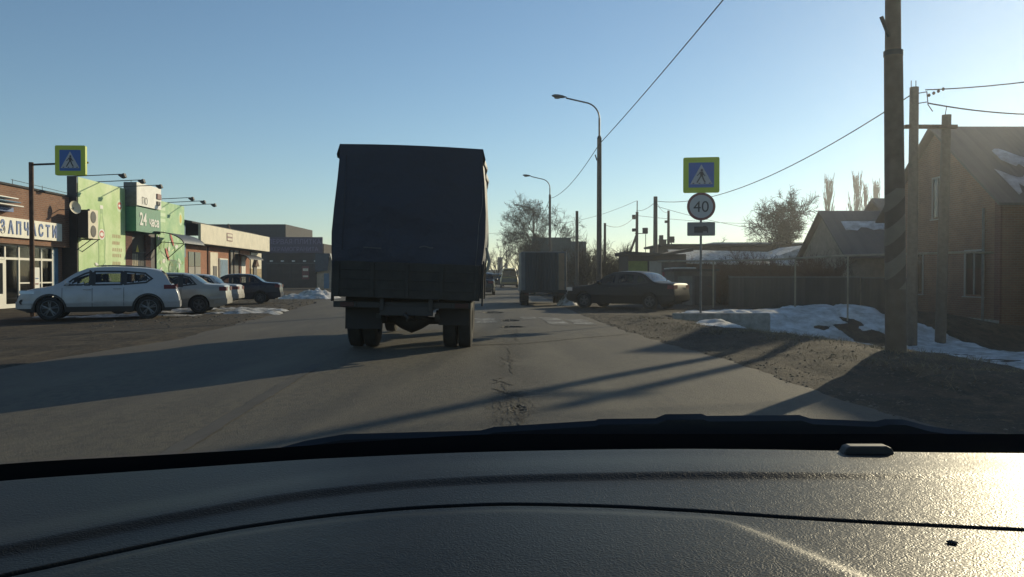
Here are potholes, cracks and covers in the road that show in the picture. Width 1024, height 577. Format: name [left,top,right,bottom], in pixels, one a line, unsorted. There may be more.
crack [440,329,624,426]
